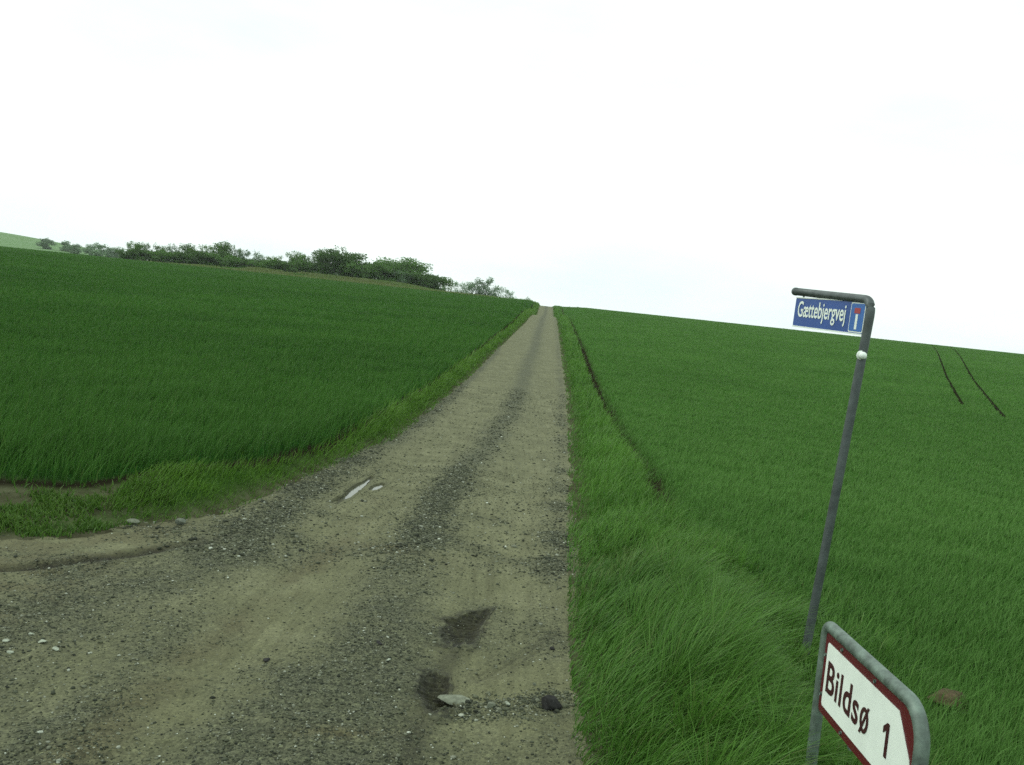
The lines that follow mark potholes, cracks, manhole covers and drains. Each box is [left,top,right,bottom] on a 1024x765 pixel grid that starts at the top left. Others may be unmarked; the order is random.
pothole [319,470,383,511]
pothole [364,481,390,493]
pothole [435,606,497,653]
pothole [412,666,462,723]
